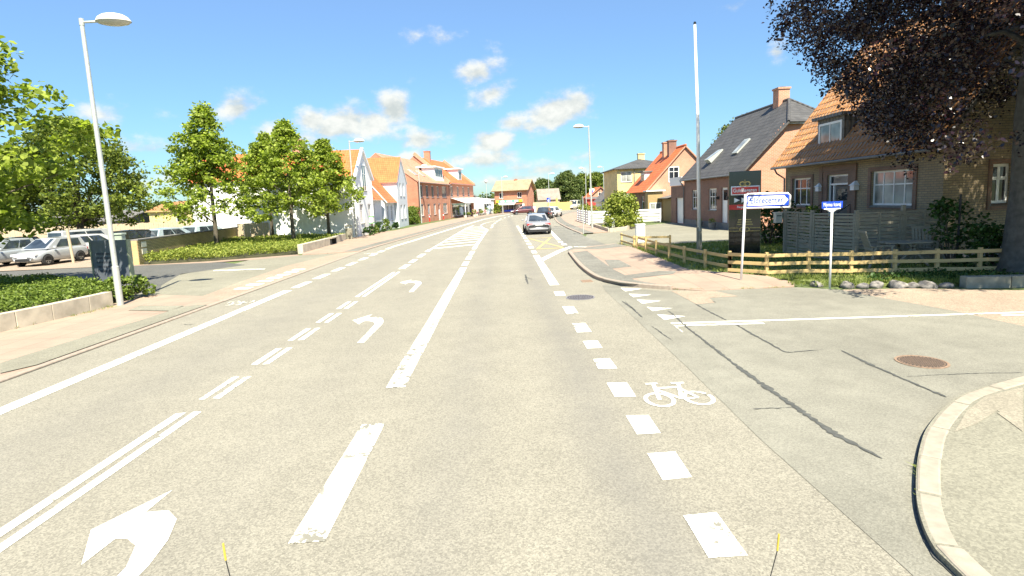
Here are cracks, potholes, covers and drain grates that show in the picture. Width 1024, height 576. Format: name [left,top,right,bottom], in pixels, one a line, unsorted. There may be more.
manhole cover [894,355,950,369]
